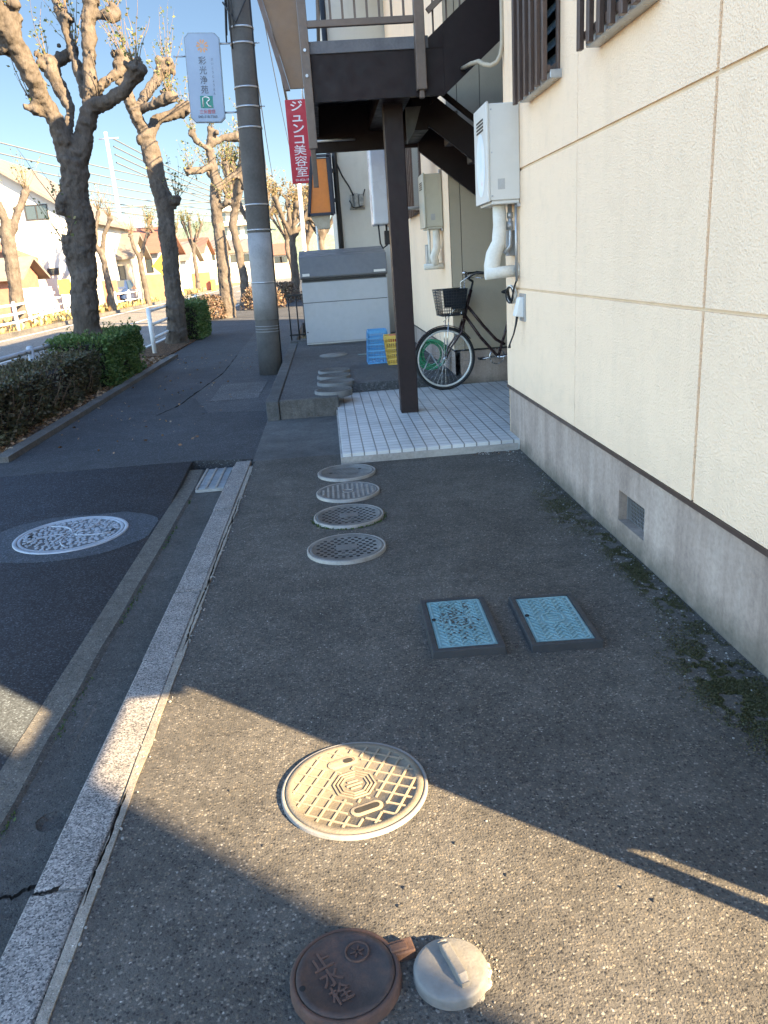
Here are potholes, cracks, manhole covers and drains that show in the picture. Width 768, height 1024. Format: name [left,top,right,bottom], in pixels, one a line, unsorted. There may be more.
manhole cover [316,482,380,503]
crack [0,884,37,900]
crack [159,357,236,415]
manhole cover [281,742,428,841]
manhole cover [307,533,386,565]
utility cover [290,928,416,1024]
drain grate [195,466,234,493]
manhole cover [12,516,129,555]
manhole cover [314,504,384,529]
manhole cover [318,464,376,482]
